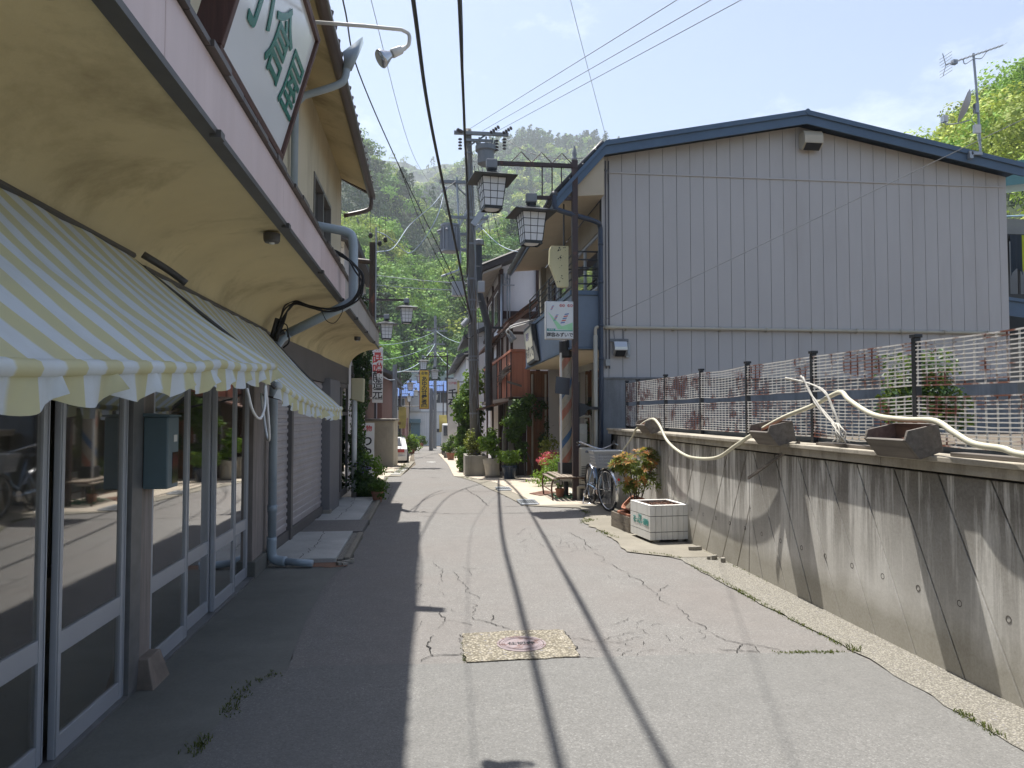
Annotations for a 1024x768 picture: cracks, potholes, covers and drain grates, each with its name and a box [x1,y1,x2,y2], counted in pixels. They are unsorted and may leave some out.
manhole cover [462,629,580,663]
crack [413,562,510,661]
crack [520,533,785,655]
